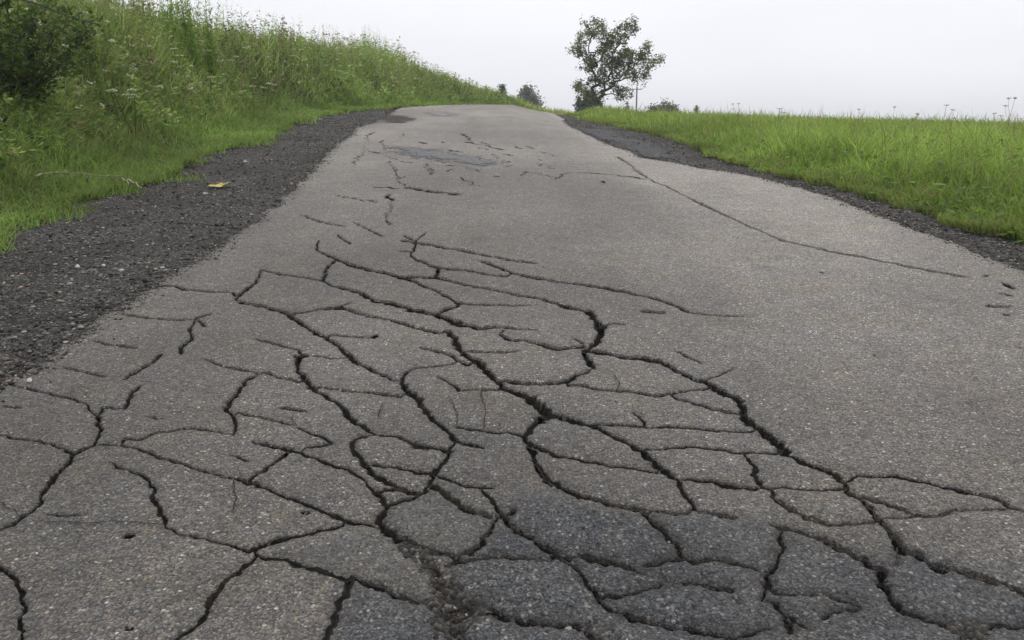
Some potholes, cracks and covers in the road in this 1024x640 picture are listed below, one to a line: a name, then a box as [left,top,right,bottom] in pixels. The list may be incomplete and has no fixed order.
crack [2,132,1009,640]
